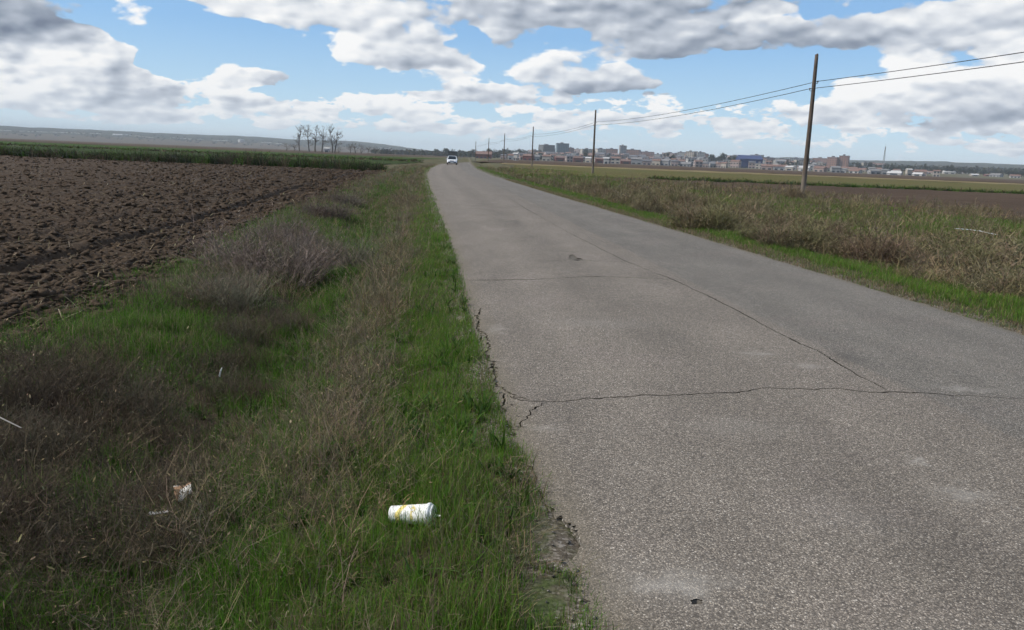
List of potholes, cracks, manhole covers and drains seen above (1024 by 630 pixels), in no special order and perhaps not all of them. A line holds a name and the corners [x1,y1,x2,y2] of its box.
crack [476,308,903,428]
